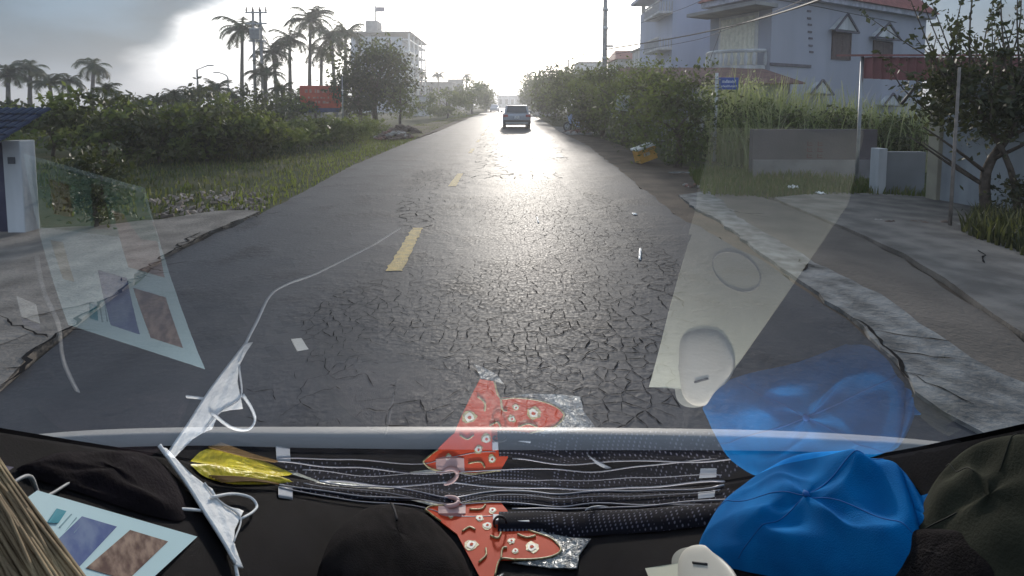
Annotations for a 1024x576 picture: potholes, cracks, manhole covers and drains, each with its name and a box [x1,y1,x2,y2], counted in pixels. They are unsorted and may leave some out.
crack [397,164,469,228]
crack [248,279,454,426]
crack [406,180,682,428]
crack [0,212,278,385]
crack [474,132,568,179]
